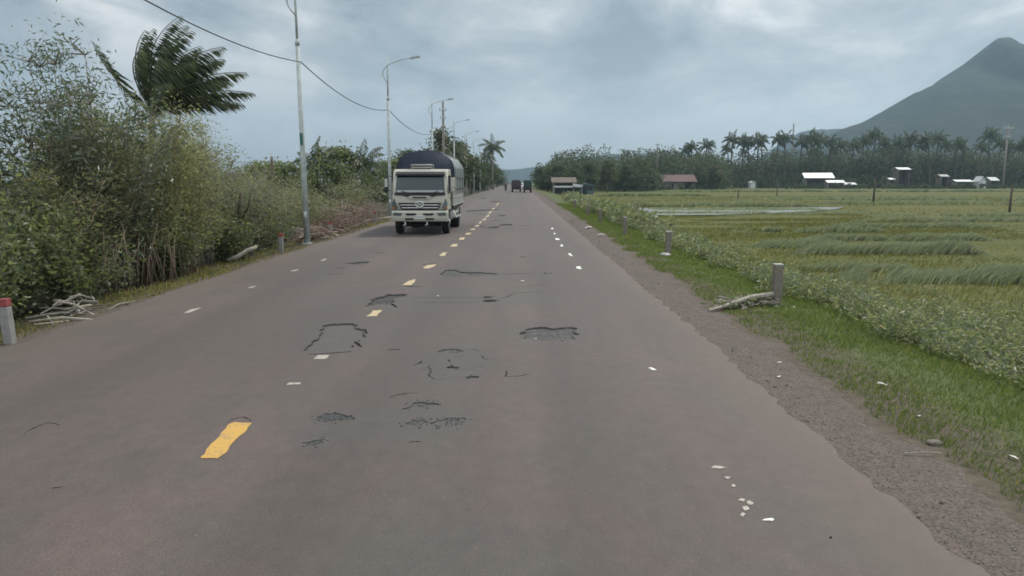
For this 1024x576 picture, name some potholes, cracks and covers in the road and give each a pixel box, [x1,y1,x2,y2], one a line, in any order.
pothole [399,417,432,428]
pothole [367,294,408,306]
pothole [303,323,367,351]
pothole [519,325,581,342]
pothole [430,417,472,429]
pothole [440,269,497,277]
pothole [312,410,355,423]
